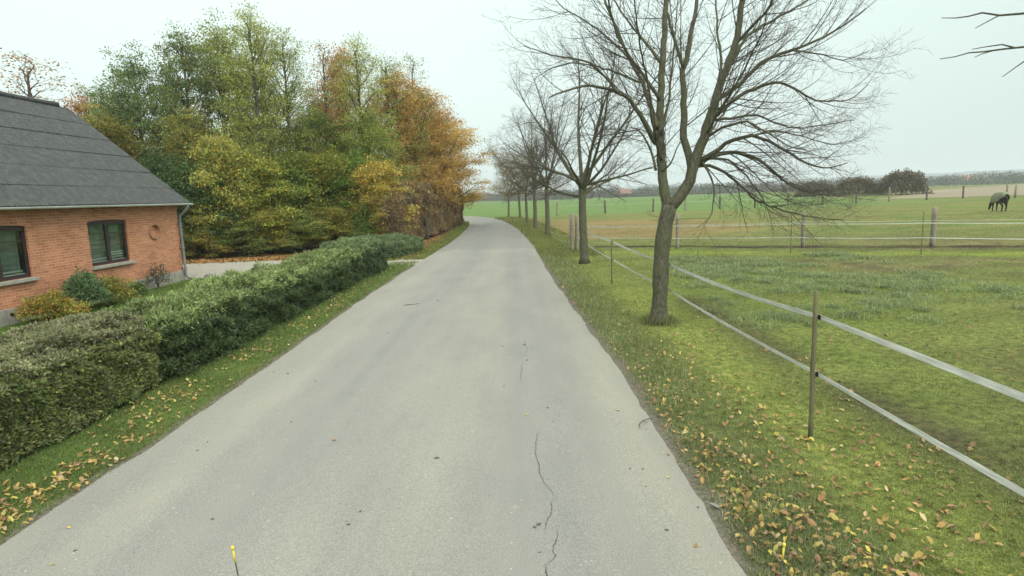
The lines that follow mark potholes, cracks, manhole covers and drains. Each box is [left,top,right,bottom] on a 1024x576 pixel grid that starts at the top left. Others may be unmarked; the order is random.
crack [535,434,558,576]
